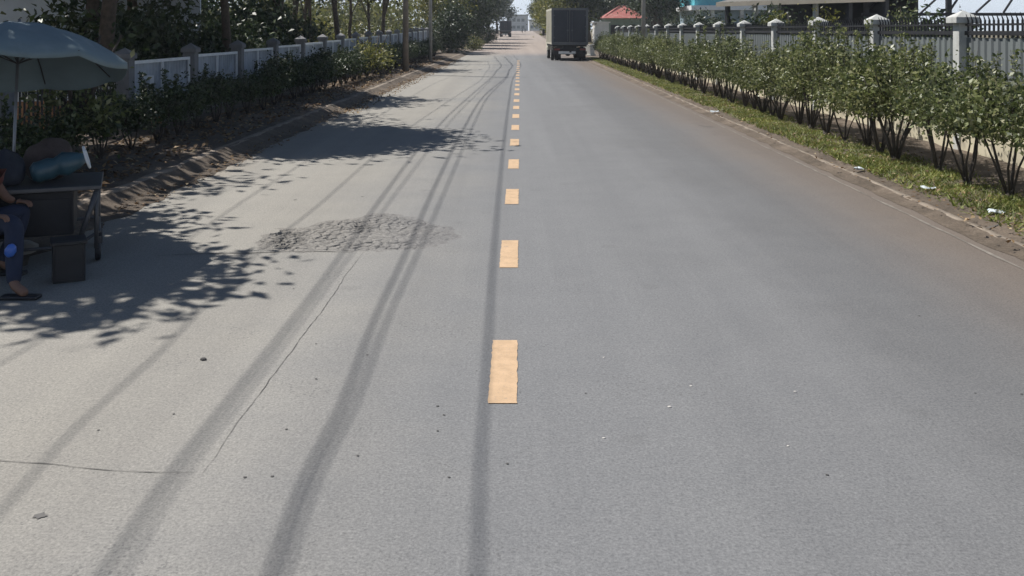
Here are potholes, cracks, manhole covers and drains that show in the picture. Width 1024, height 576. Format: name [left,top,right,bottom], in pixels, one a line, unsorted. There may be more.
crack [0,460,194,473]
crack [204,254,362,471]
